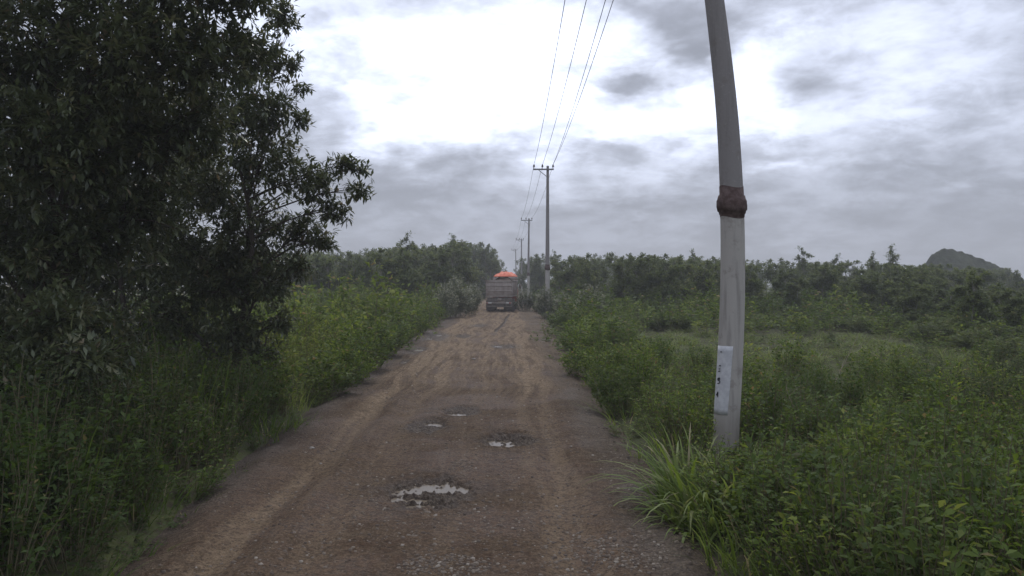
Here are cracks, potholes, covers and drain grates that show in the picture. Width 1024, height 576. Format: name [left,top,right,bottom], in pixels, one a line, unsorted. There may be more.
pothole [397,415,453,435]
pothole [374,470,491,515]
pothole [437,405,483,417]
pothole [418,331,452,343]
pothole [469,428,547,449]
pothole [404,345,430,355]
